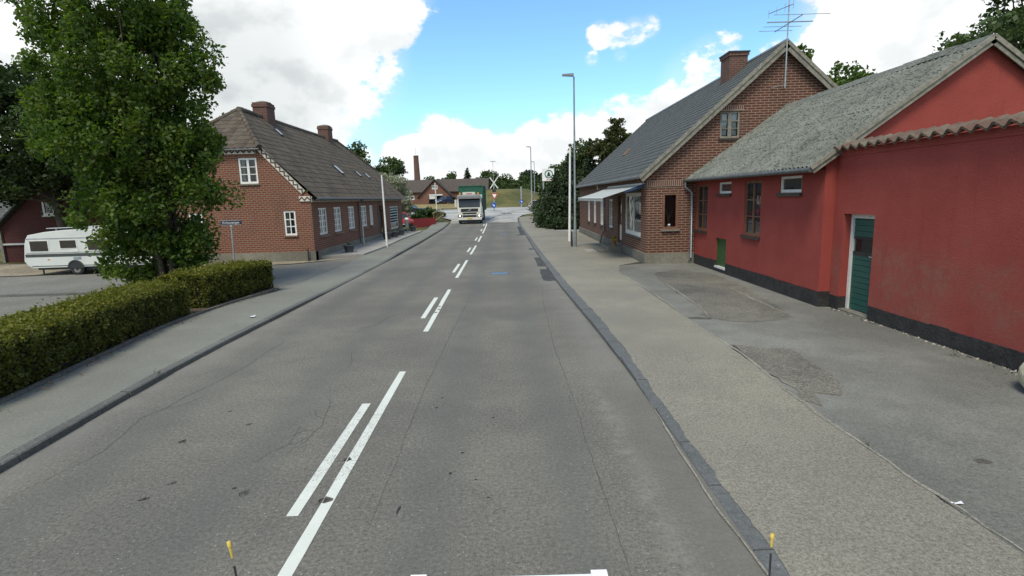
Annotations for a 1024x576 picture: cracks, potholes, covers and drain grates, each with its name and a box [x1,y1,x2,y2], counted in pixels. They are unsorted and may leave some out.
crack [542,293,632,576]
crack [258,400,331,460]
